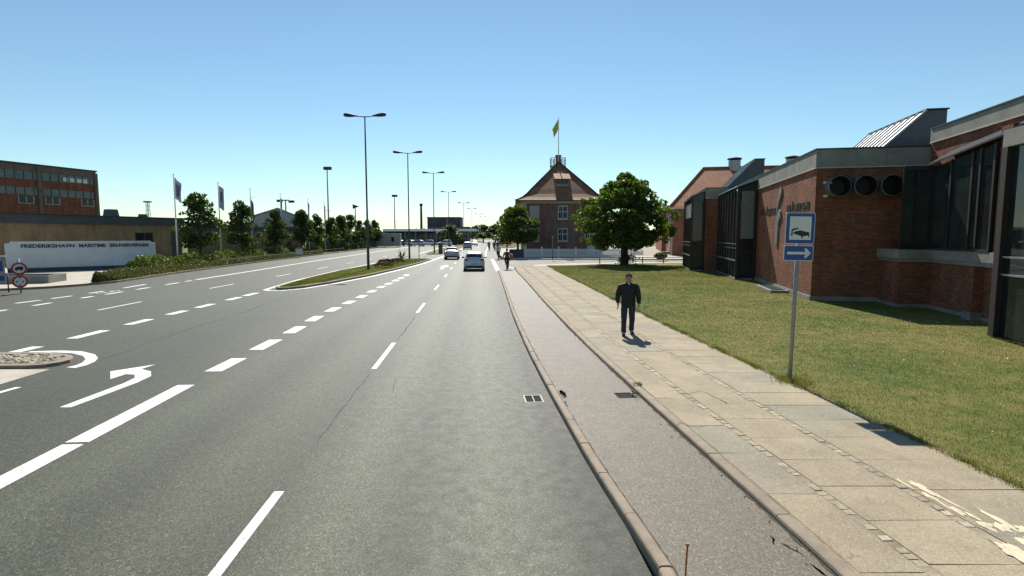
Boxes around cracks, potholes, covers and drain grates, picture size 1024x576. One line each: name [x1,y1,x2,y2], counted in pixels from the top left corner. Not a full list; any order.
crack [770,536,826,576]
drain grate [523,395,544,403]
